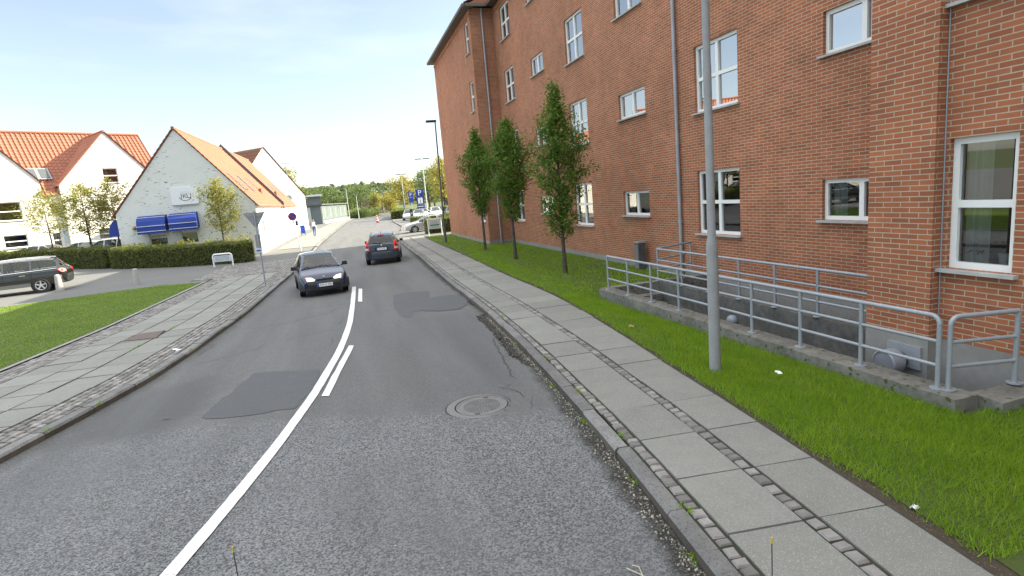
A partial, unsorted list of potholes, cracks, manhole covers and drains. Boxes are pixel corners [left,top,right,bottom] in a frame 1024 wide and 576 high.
utility cover [121,330,165,342]
crack [492,339,533,406]
manhole cover [445,394,511,419]
